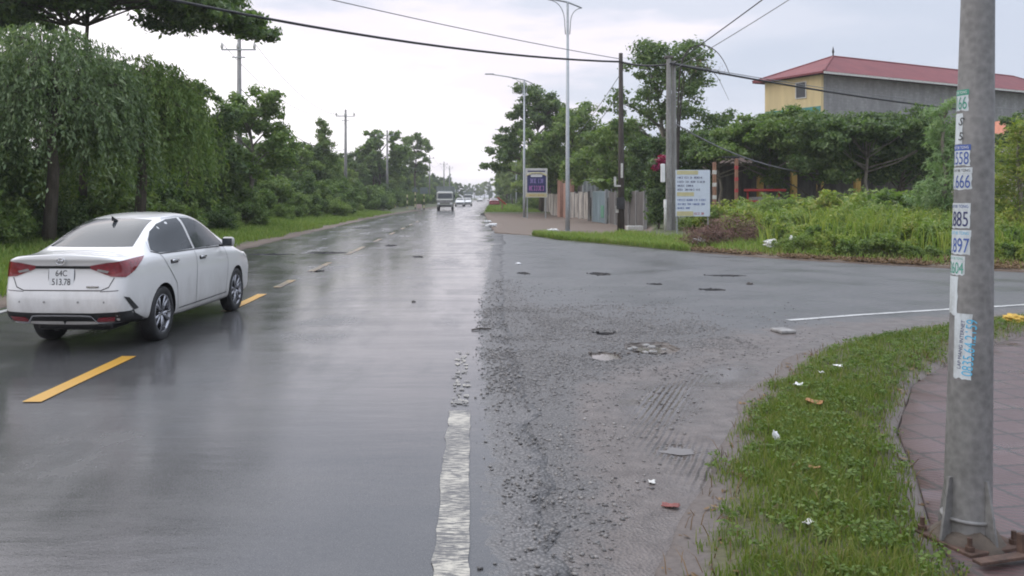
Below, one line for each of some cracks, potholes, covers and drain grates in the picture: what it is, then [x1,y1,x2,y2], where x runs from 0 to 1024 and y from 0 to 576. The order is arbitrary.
pothole [623,340,680,355]
pothole [588,351,623,360]
